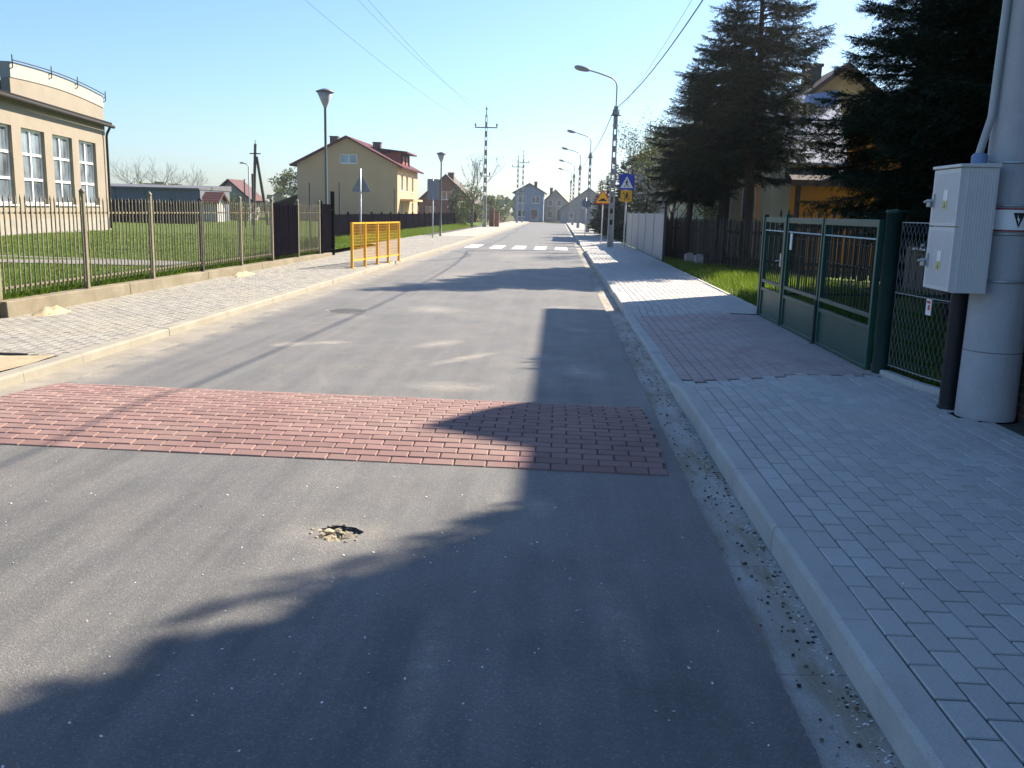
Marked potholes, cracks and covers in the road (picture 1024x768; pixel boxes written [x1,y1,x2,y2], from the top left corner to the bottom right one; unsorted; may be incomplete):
pothole [310,524,364,542]
